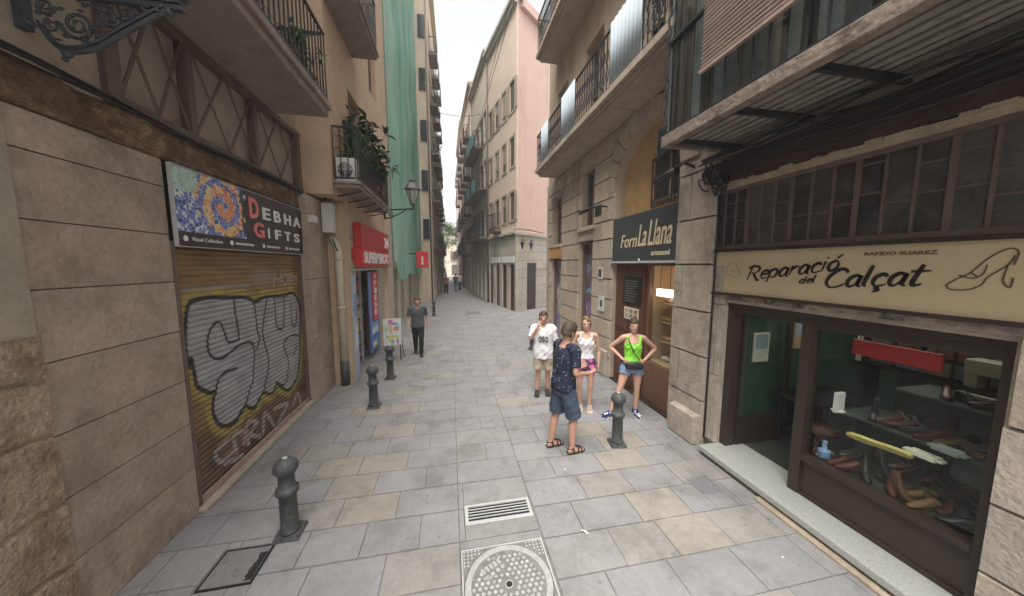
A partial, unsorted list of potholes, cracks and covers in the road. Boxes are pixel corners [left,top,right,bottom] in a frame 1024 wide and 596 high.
drain grate [464,497,534,527]
utility cover [194,544,276,594]
drain grate [687,477,722,494]
manhole cover [461,537,560,596]
